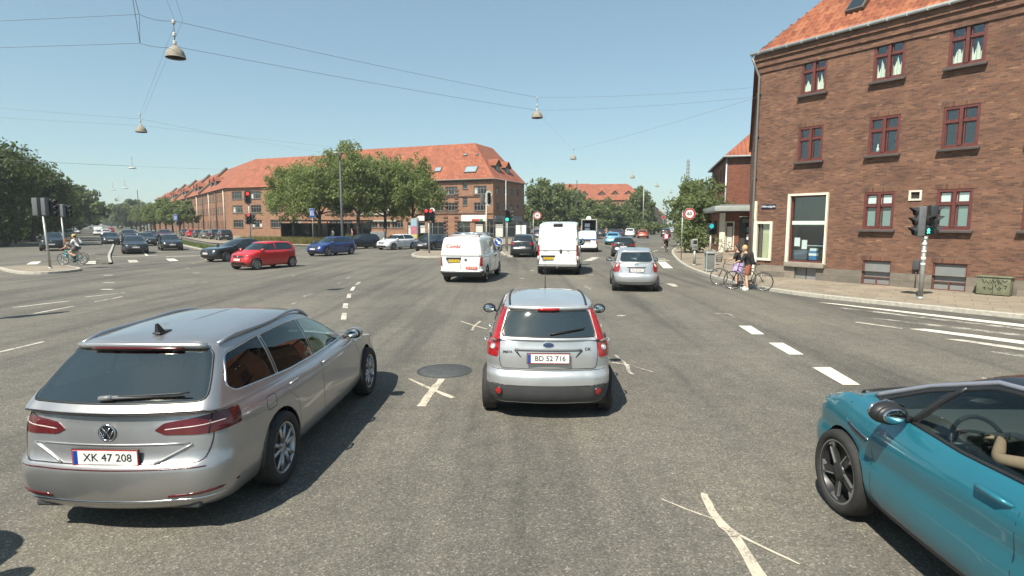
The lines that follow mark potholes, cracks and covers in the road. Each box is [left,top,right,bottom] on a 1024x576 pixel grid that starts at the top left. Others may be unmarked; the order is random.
manhole cover [417,364,472,378]
